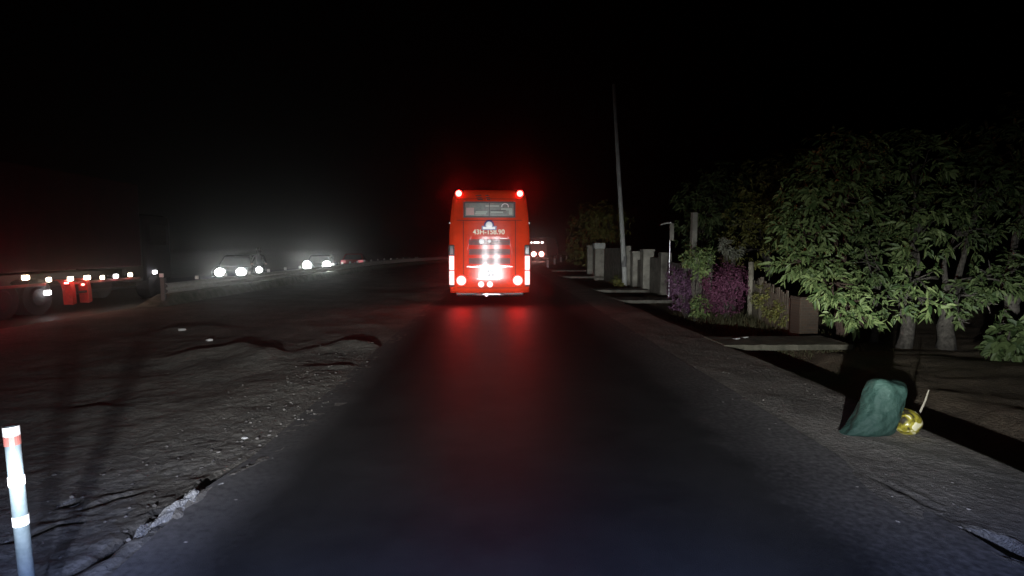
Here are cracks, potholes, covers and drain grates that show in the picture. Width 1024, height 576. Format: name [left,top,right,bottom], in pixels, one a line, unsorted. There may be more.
crack [873,478,933,509]
crack [8,479,216,576]
